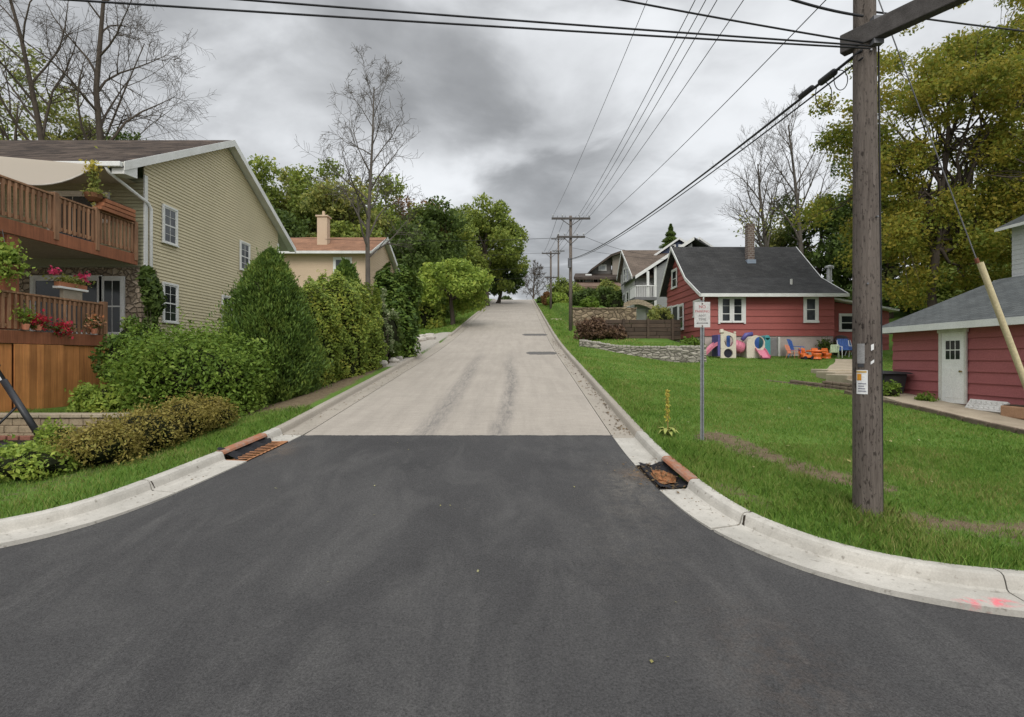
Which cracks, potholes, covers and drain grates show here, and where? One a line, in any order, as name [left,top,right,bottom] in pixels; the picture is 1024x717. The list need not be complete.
drain grate [217,433,288,462]
drain grate [636,456,699,490]
